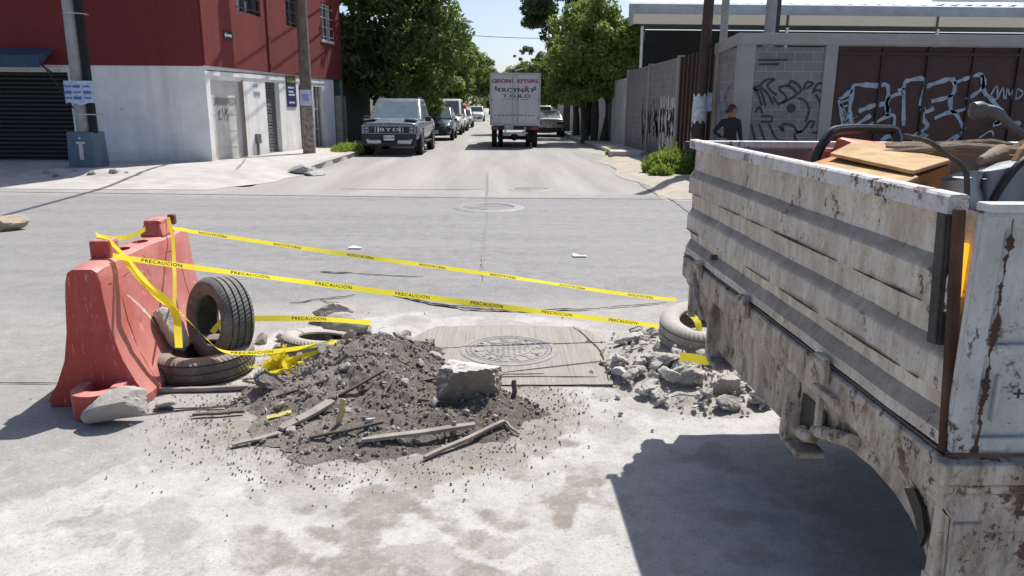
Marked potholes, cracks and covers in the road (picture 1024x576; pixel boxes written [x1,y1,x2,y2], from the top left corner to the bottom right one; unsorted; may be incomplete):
manhole cover [452,202,525,212]
manhole cover [460,335,558,366]
